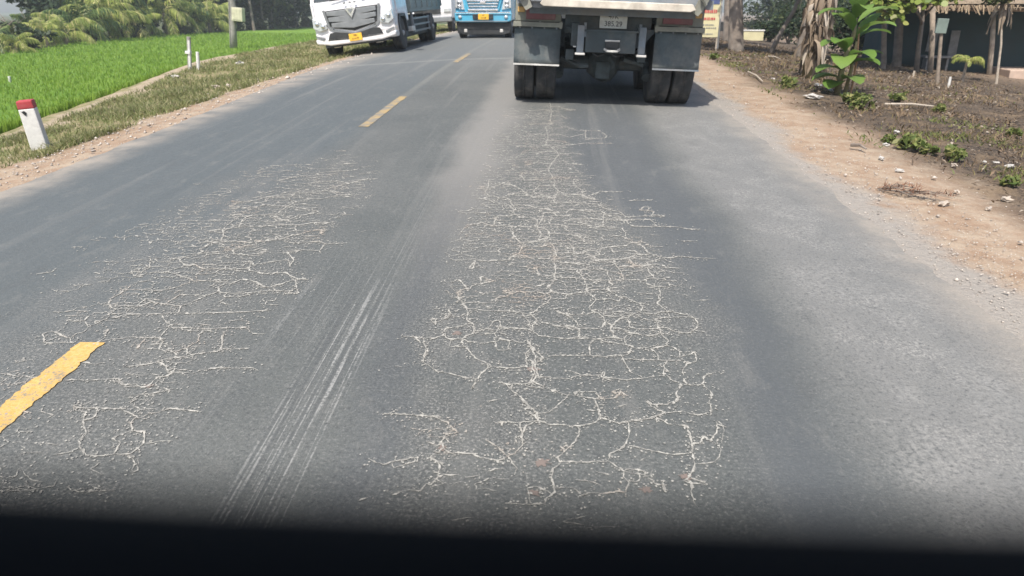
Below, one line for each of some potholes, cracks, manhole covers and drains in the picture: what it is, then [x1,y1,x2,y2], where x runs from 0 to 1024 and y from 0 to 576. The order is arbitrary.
crack [360,102,732,506]
crack [0,150,382,483]
